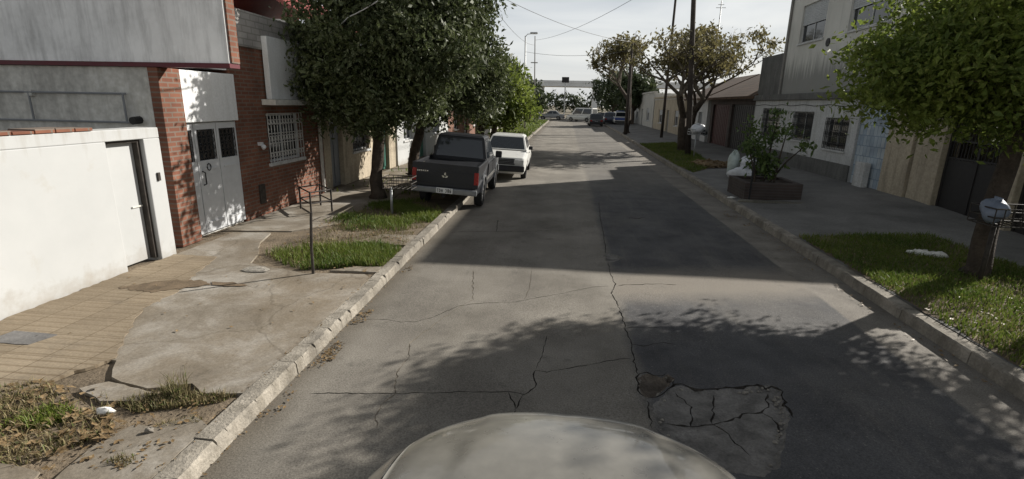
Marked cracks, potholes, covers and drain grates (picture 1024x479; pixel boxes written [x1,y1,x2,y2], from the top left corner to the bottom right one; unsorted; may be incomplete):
crack [309,272,793,457]
pothole [637,374,674,398]
